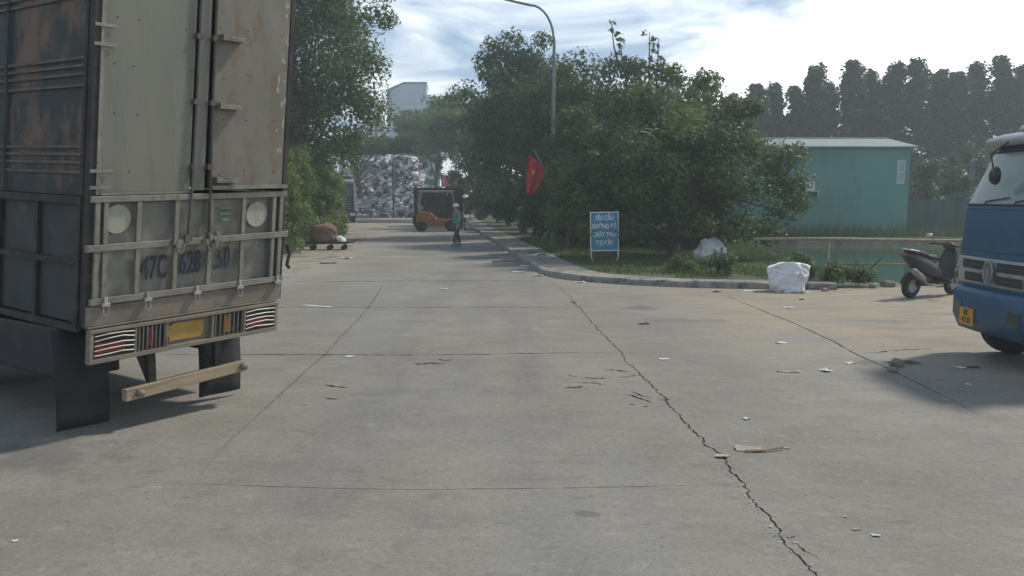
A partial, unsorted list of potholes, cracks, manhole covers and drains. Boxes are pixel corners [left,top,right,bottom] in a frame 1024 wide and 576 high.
crack [729,297,983,419]
crack [159,280,818,576]
